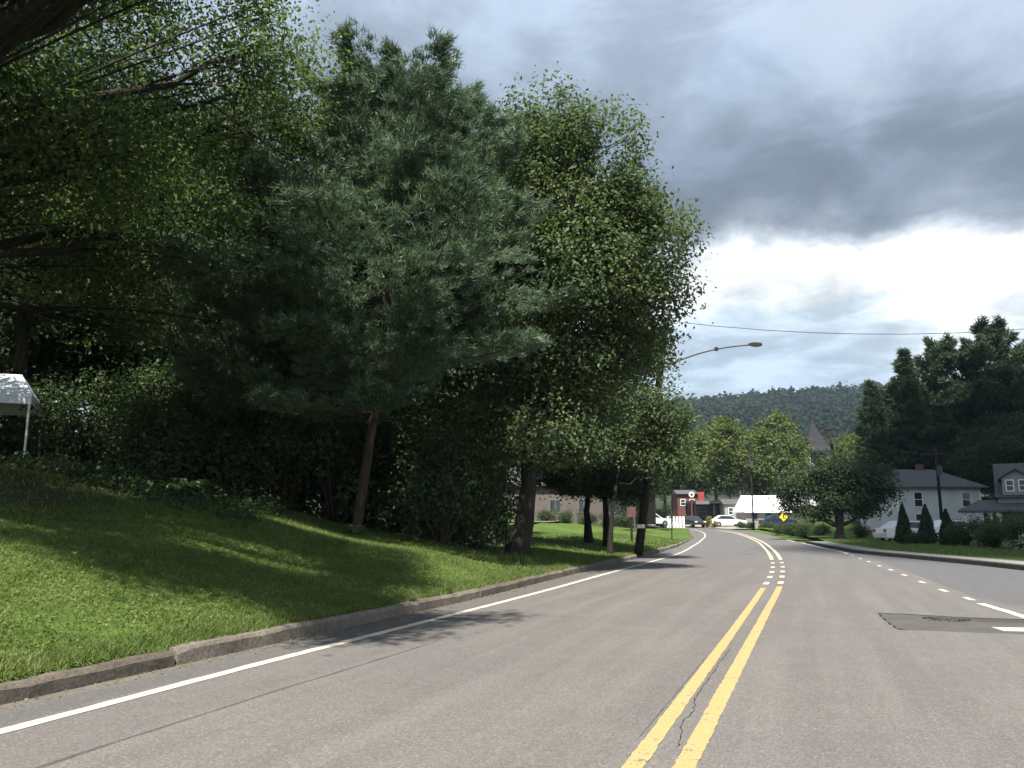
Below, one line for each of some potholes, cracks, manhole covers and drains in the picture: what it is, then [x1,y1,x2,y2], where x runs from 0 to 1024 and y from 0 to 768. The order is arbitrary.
crack [640,649,730,748]
